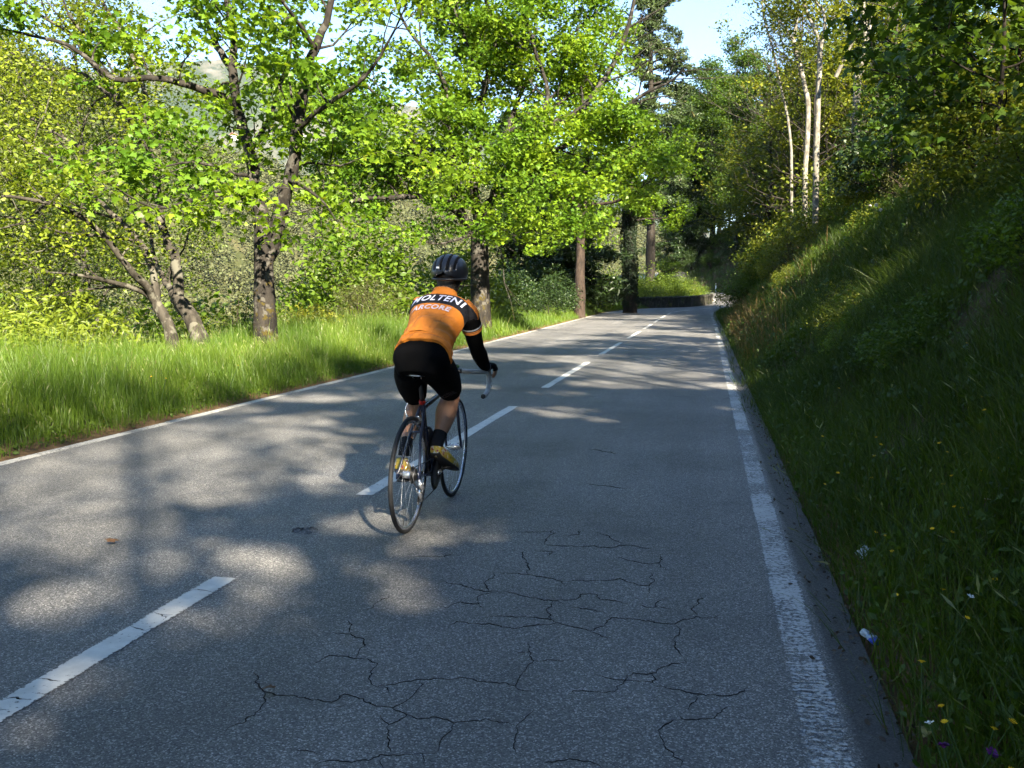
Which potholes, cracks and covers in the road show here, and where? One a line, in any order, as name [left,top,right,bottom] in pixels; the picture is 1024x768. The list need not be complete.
crack [439,530,745,764]
crack [542,758,601,767]
crack [221,621,558,767]
